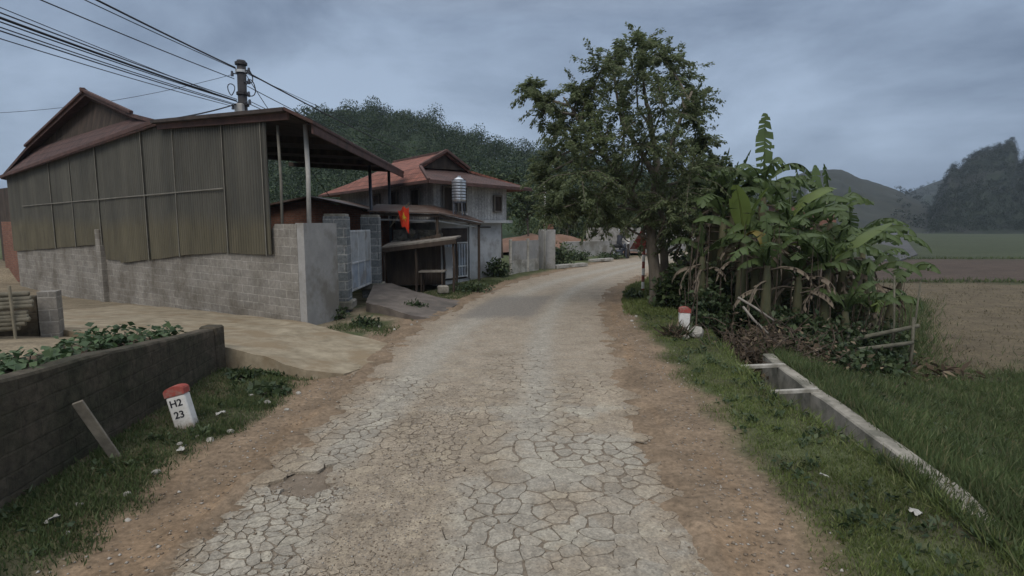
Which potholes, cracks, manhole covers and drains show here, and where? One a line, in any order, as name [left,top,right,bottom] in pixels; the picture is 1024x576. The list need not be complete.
pothole [268,467,333,499]
crack [175,376,476,576]
crack [452,400,680,576]
crack [489,358,638,400]
